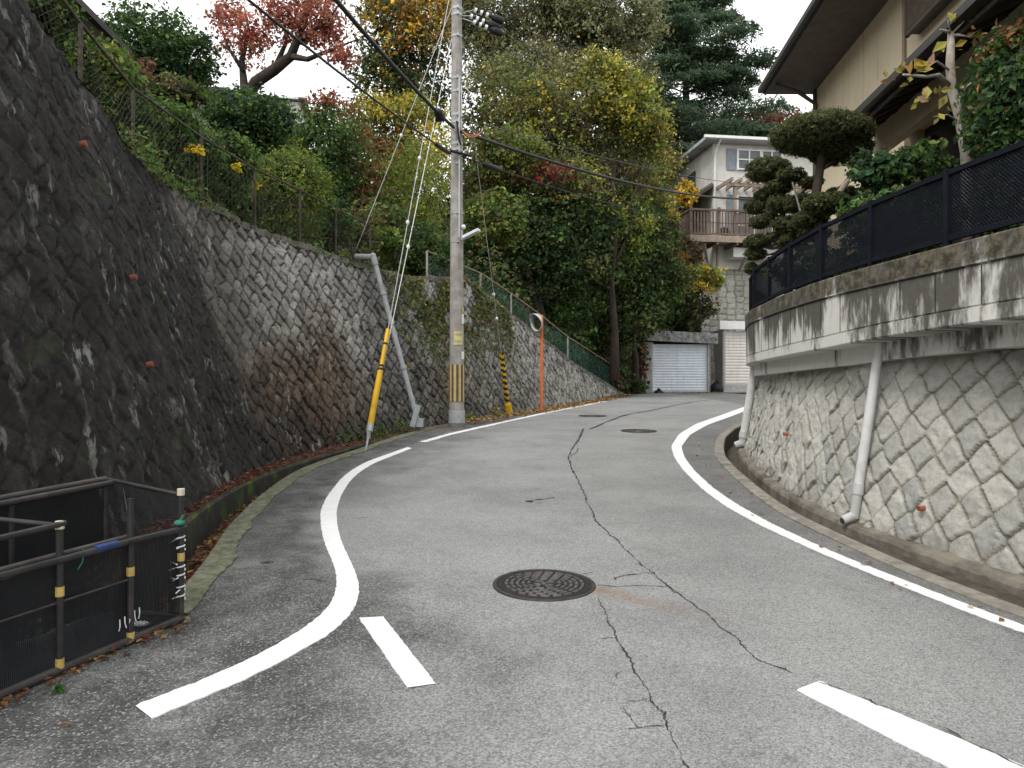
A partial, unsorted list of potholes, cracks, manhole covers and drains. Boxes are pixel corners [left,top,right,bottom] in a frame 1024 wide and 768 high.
crack [568,399,792,673]
crack [598,598,689,768]
manhole cover [493,569,596,602]
